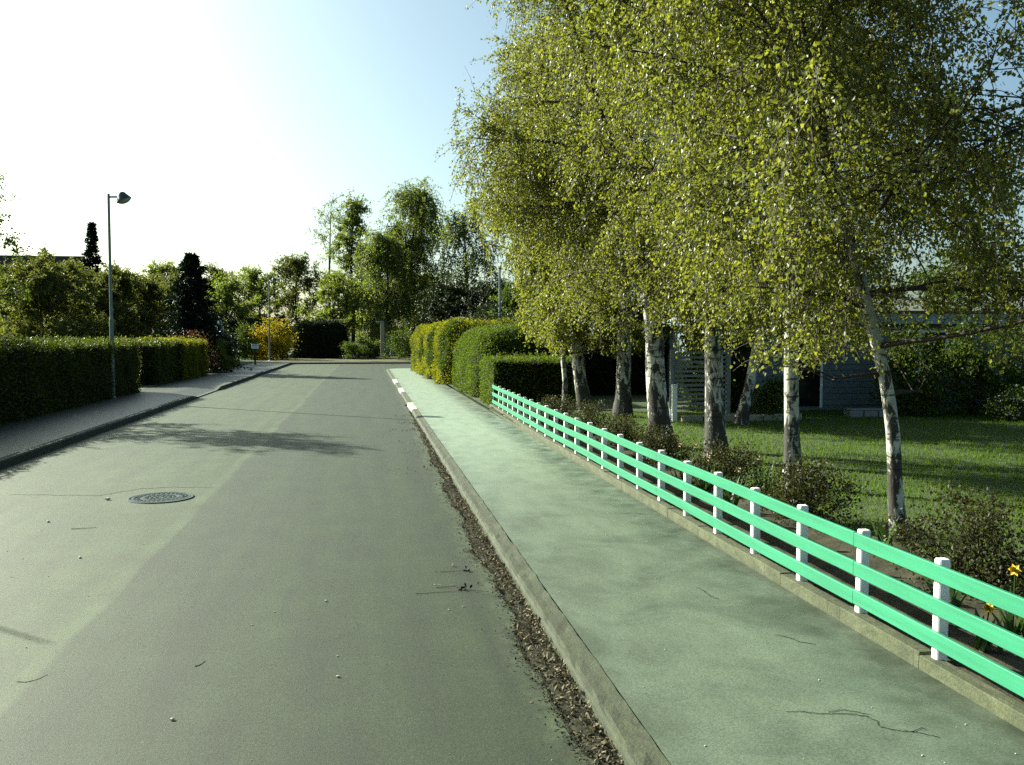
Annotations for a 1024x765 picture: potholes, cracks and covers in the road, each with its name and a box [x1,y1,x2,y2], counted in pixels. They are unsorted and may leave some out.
crack [786,709,941,738]
manhole cover [127,492,195,504]
